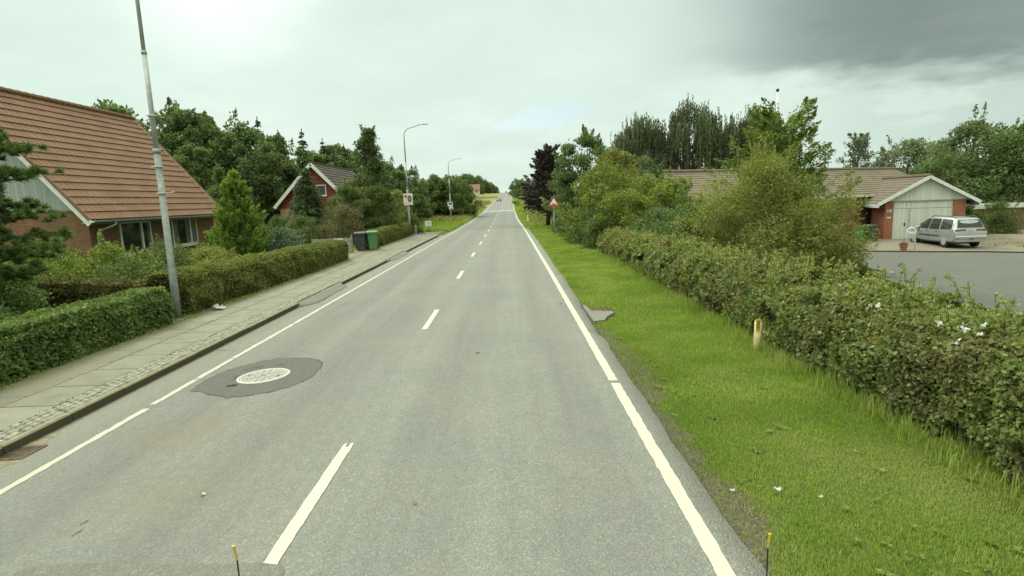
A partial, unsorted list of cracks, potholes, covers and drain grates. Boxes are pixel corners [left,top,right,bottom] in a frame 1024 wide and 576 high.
manhole cover [236,368,290,384]
drain grate [0,445,48,461]
